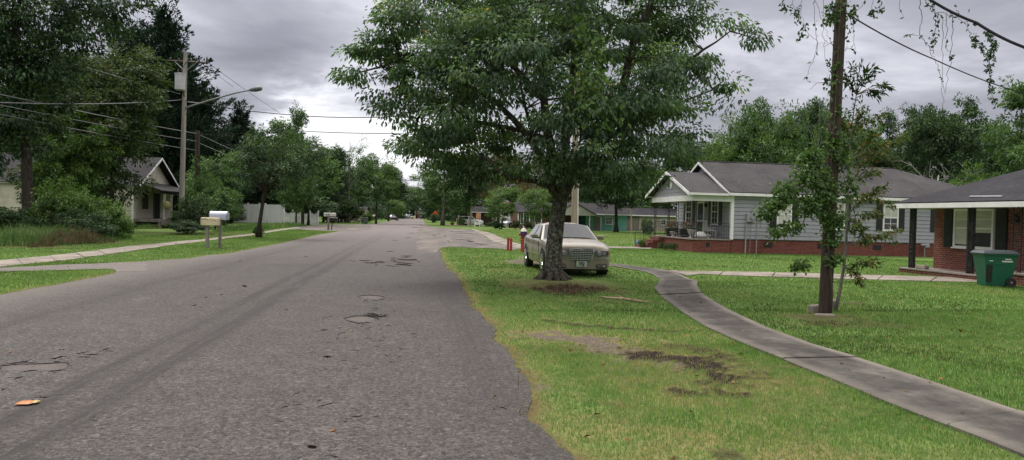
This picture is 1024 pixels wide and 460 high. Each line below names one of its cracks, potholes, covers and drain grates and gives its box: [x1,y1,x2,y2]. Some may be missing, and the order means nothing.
crack [1,348,109,391]
pothole [344,316,379,324]
pothole [0,362,69,371]
crack [349,227,420,267]
